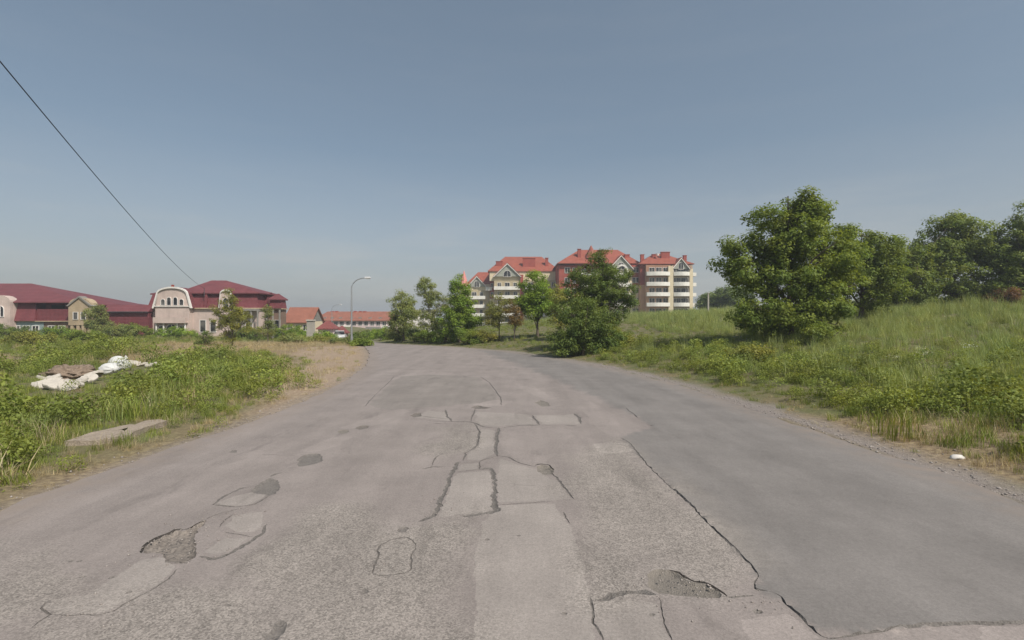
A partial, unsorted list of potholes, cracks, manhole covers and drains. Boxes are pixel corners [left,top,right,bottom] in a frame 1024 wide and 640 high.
crack [590,570,754,640]
crack [372,377,582,576]
pothole [143,520,206,563]
pothole [647,569,722,598]
pothole [251,478,281,496]
pothole [297,453,323,466]
